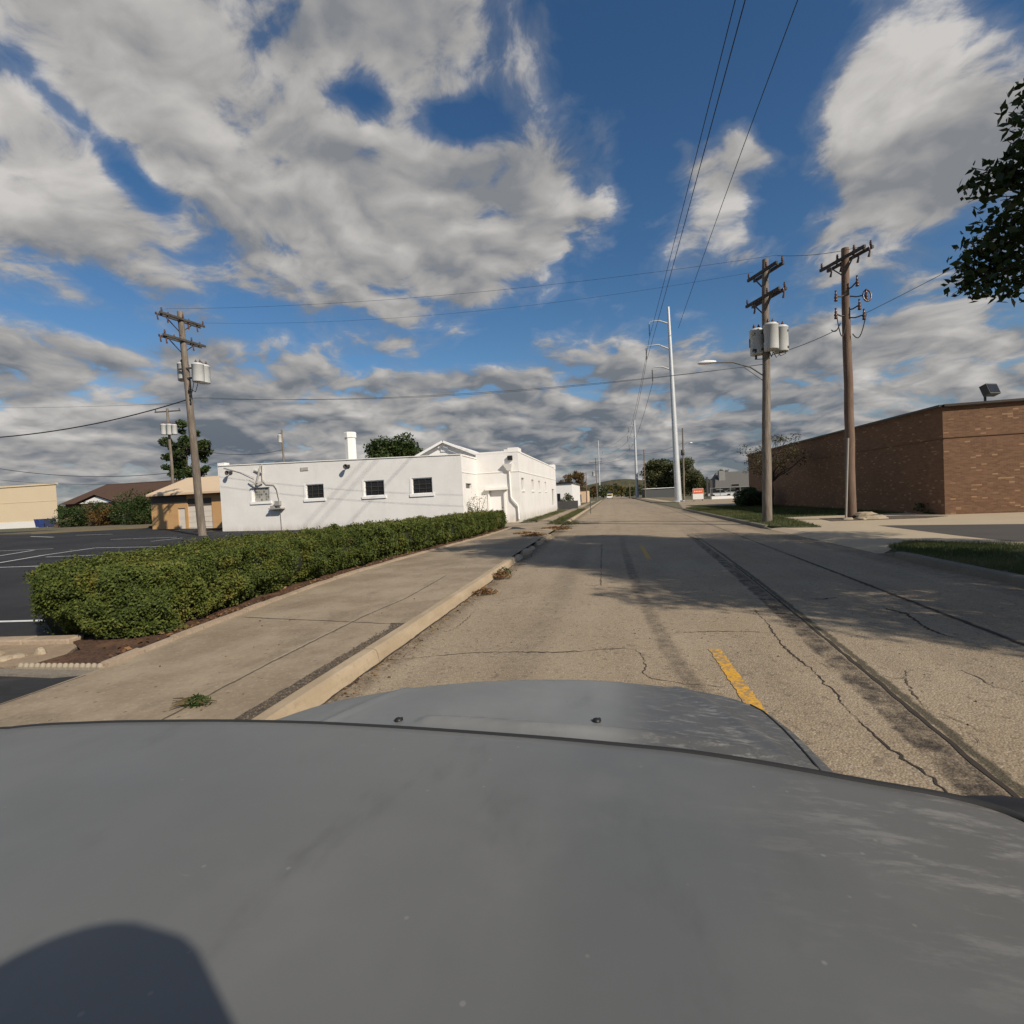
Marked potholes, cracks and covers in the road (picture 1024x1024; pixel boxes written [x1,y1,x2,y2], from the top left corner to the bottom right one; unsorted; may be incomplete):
crack [322,566,724,705]
crack [662,609,980,792]
